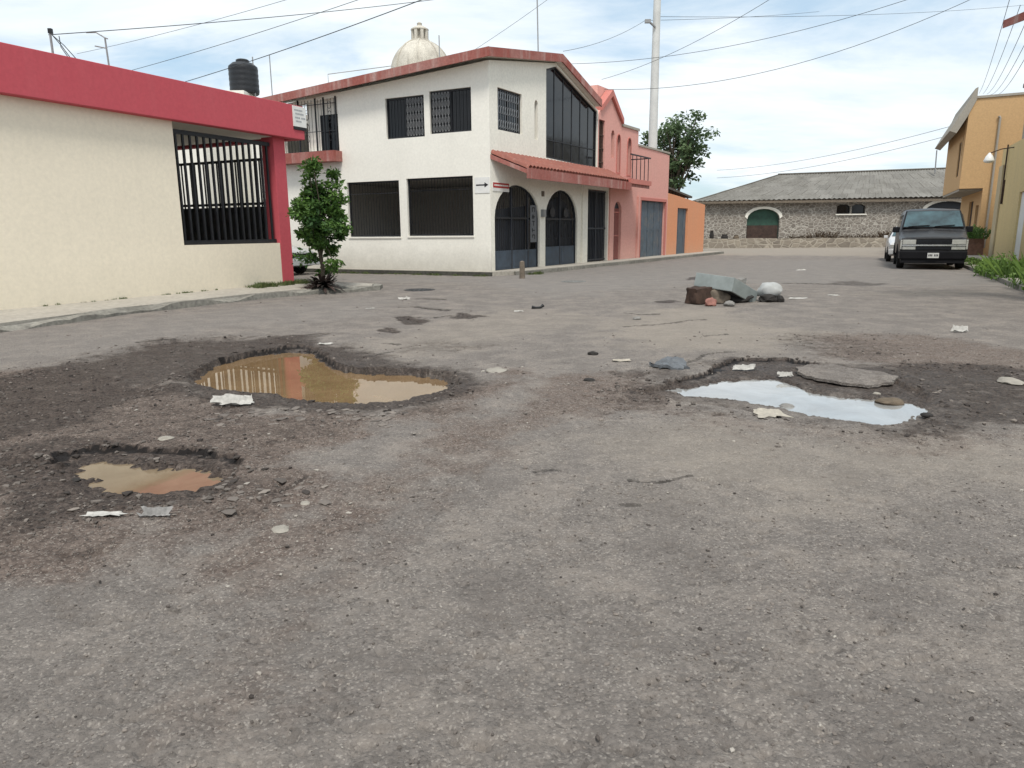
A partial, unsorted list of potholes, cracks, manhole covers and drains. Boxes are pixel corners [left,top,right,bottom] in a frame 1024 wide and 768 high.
pothole [175,344,468,412]
pothole [392,316,430,324]
crack [627,475,694,484]
pothole [632,357,954,431]
pothole [39,443,250,508]
